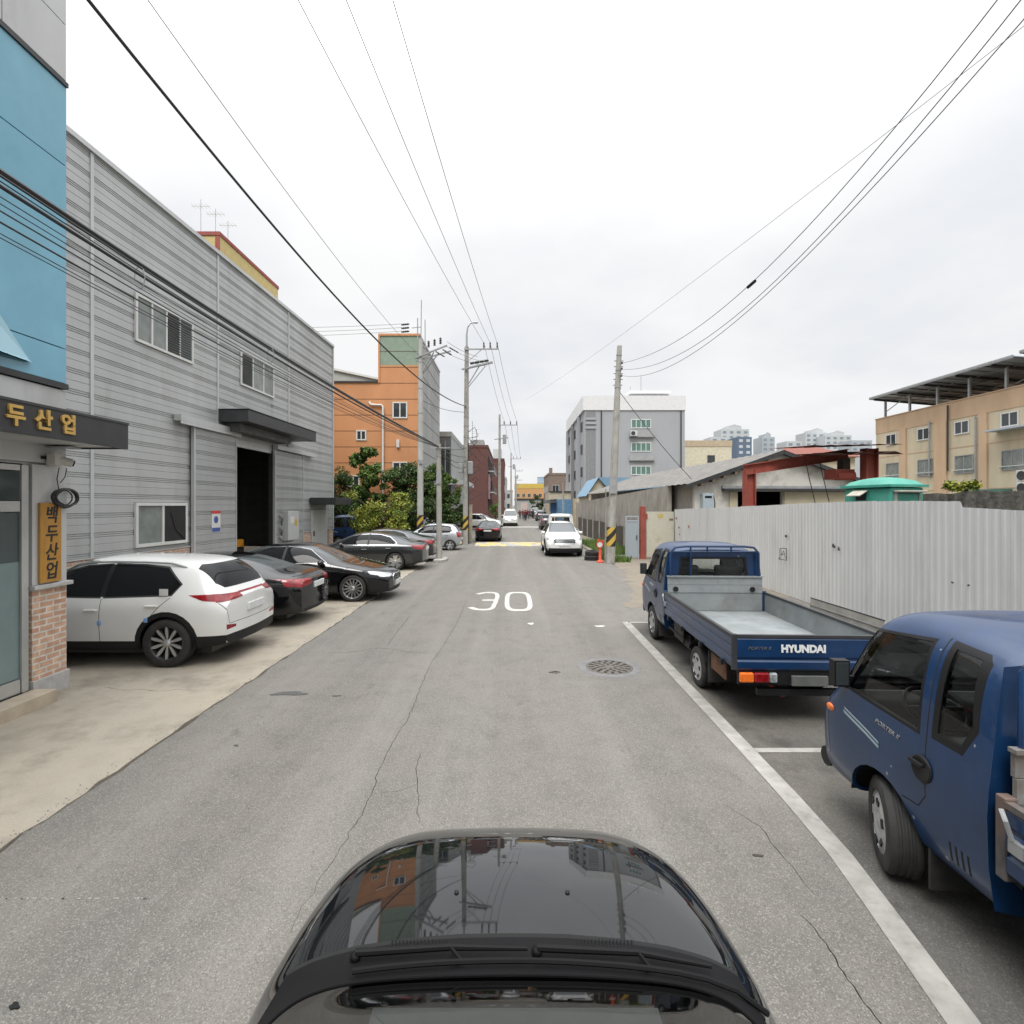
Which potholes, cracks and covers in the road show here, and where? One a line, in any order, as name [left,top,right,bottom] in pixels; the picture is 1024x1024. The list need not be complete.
manhole cover [578,658,641,678]
crack [799,913,882,1024]
crack [727,805,813,893]
crack [290,599,467,932]
